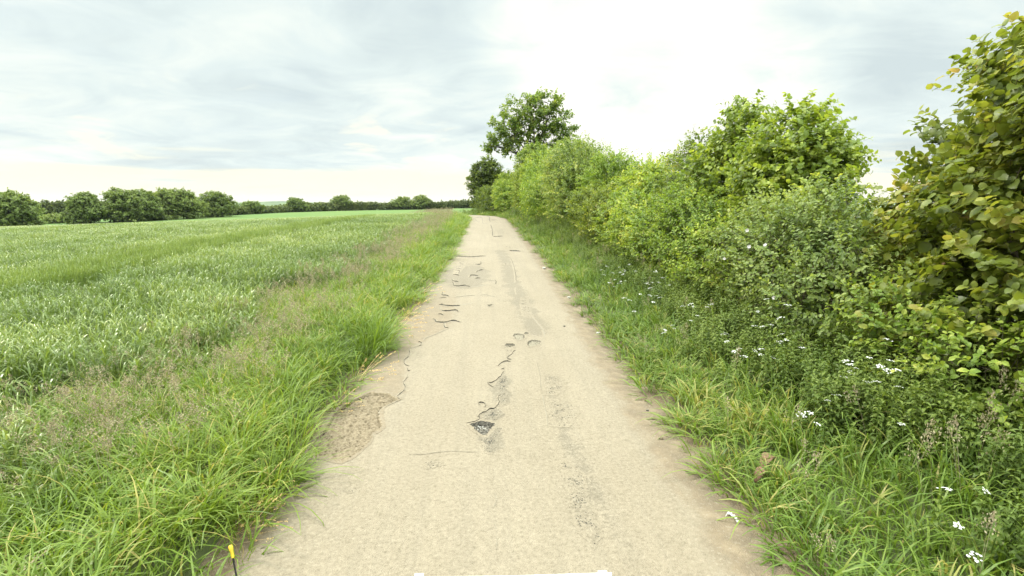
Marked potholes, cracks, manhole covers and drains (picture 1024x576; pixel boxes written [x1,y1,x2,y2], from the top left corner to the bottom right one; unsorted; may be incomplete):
crack [378,257,517,415]
pothole [466,419,498,437]
